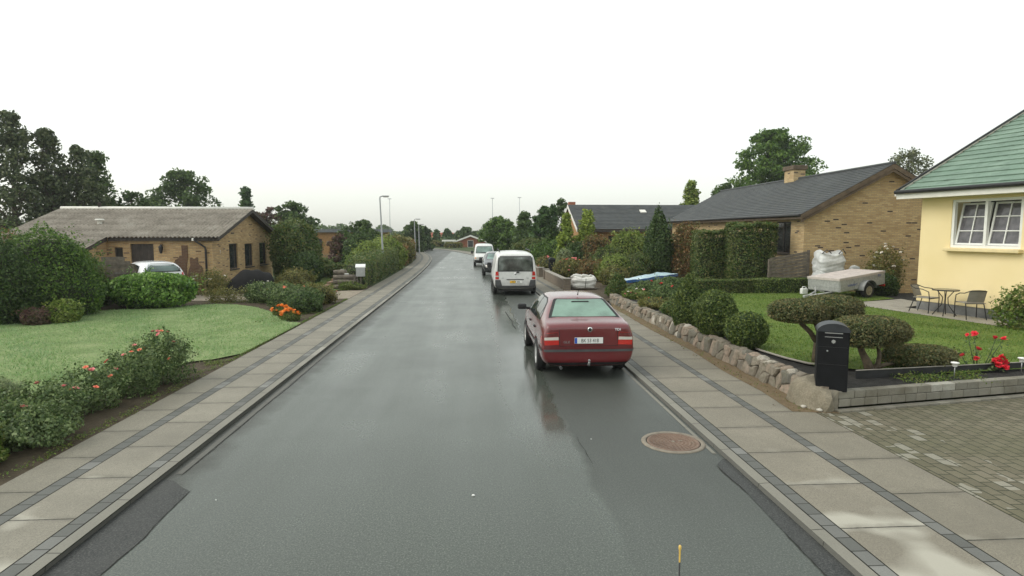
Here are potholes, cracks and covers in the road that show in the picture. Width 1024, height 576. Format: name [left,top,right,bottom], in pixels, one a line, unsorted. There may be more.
manhole cover [641,431,706,454]
